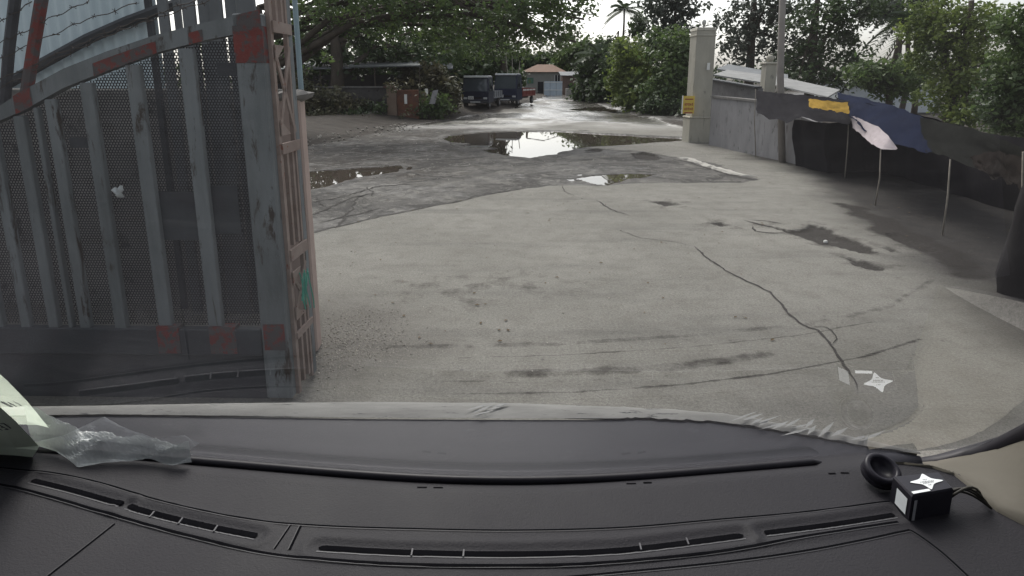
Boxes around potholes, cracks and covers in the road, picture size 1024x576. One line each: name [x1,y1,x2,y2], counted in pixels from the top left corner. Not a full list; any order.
pothole [442,130,682,157]
crack [313,172,462,228]
crack [562,186,858,386]
